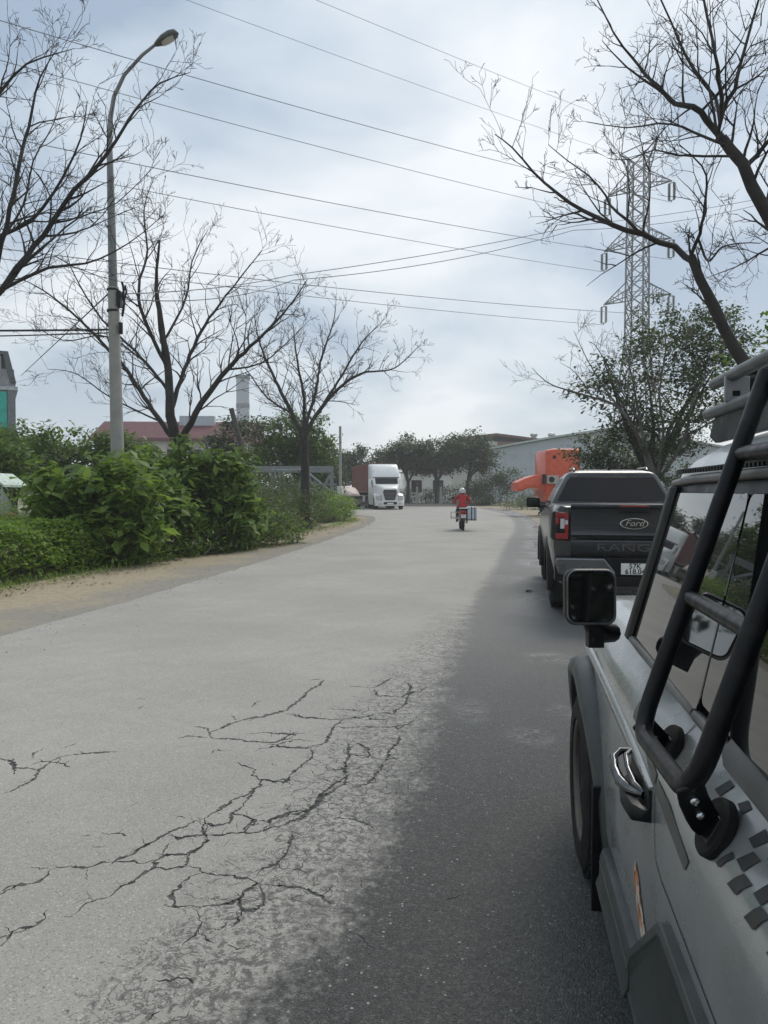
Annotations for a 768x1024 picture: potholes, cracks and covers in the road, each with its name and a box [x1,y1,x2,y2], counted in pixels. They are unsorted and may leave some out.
crack [0,618,462,950]
